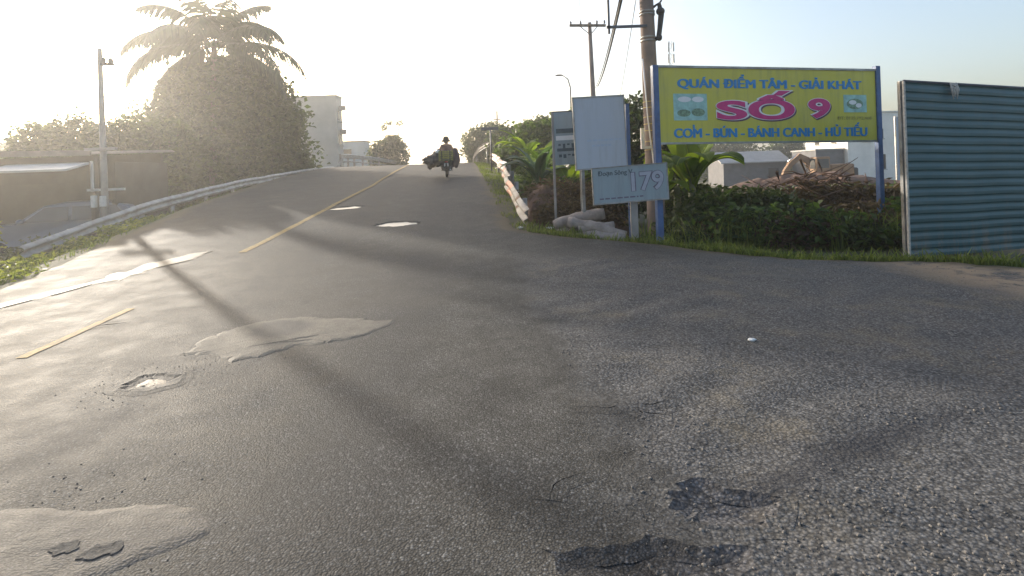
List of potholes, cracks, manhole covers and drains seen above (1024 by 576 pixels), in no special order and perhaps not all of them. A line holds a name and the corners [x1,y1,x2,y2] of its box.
pothole [104,369,194,396]
crack [575,393,684,421]
crack [533,463,597,502]
